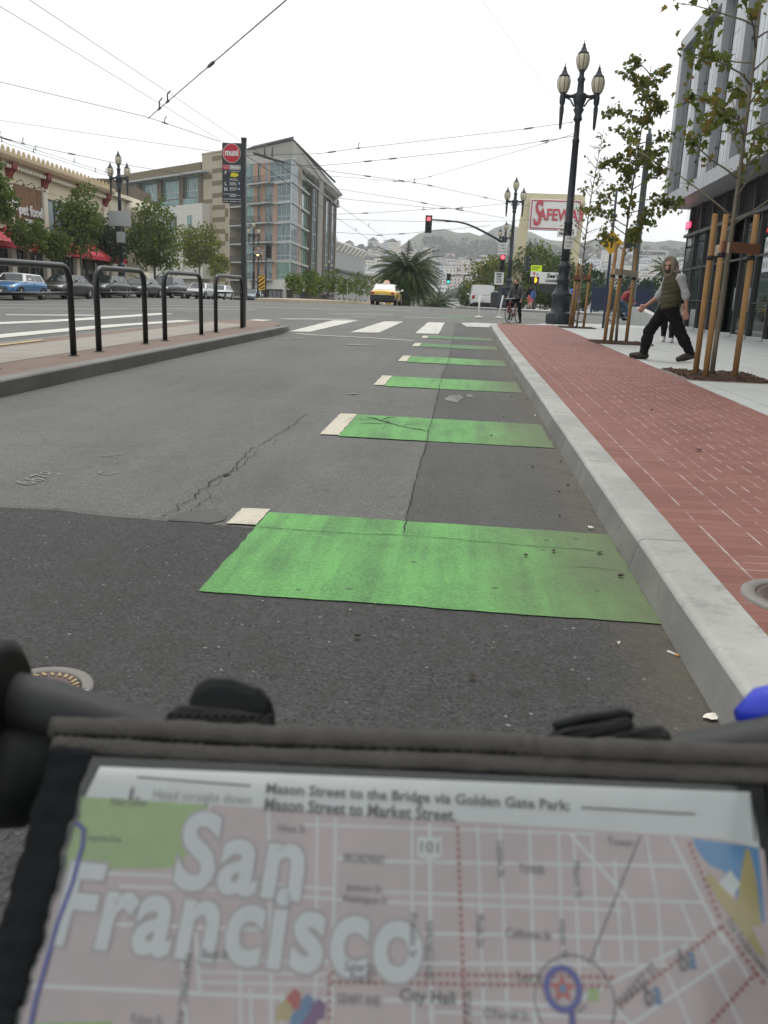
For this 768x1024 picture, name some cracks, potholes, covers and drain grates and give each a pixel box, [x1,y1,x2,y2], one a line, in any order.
crack [350,402,426,431]
crack [163,413,307,516]
manhole cover [740,578,768,610]
